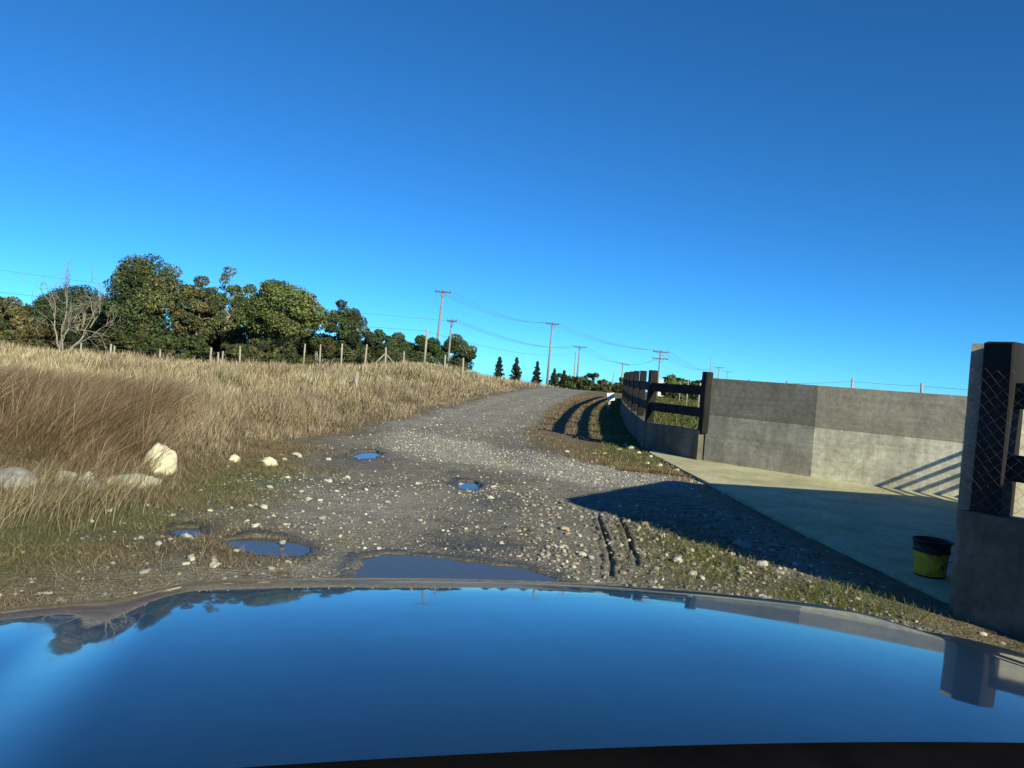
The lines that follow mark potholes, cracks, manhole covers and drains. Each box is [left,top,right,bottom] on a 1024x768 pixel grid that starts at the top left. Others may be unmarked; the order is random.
pothole [212,530,325,560]
pothole [155,522,222,539]
pothole [344,449,388,459]
pothole [446,478,491,491]
pothole [336,549,576,583]
